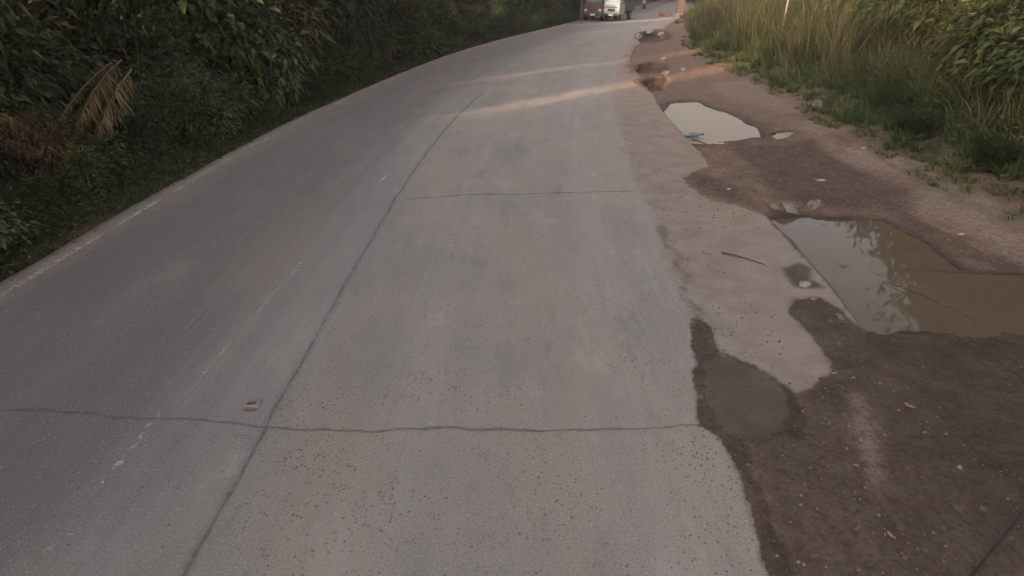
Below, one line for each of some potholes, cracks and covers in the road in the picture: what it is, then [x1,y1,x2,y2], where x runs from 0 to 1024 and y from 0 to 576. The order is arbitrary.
pothole [631,60,678,75]
pothole [662,100,772,147]
pothole [634,29,676,43]
pothole [632,75,677,92]
pothole [767,210,1024,352]
